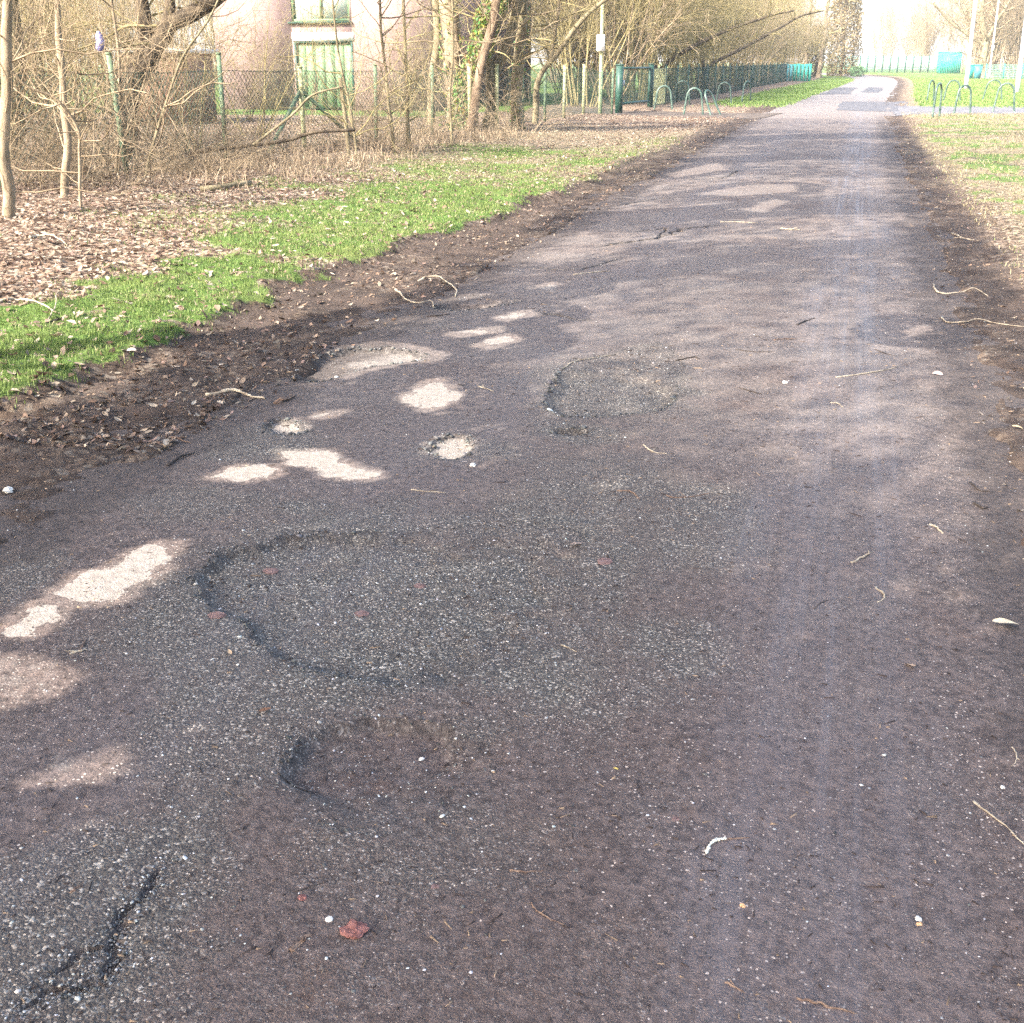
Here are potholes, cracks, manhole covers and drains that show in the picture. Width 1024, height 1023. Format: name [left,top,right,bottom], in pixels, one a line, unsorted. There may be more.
crack [2,855,190,1023]
crack [544,225,711,270]
pothole [420,432,477,460]
pothole [289,345,430,382]
